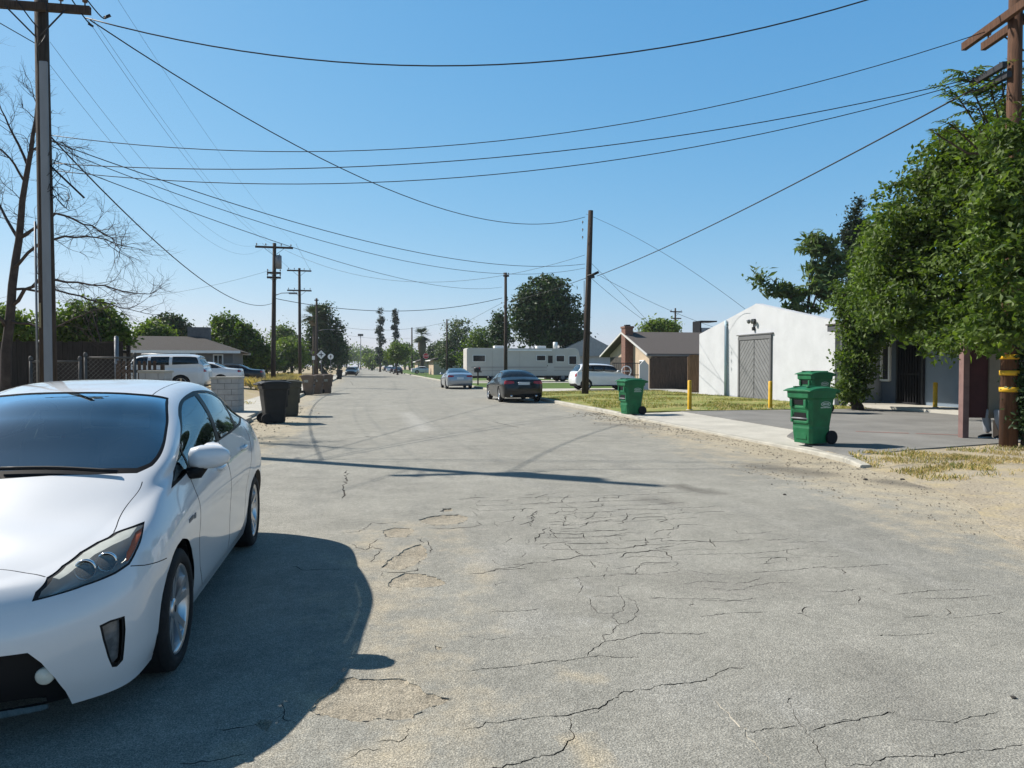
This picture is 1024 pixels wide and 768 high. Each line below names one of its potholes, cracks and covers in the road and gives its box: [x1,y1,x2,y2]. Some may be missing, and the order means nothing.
crack [346,522,480,575]
pothole [382,544,427,570]
crack [847,744,1024,766]
pothole [307,677,451,722]
pothole [382,528,414,538]
crack [463,668,895,768]
crack [455,489,1002,671]
pothole [388,573,446,588]
pothole [419,514,469,526]
crack [917,713,995,724]
